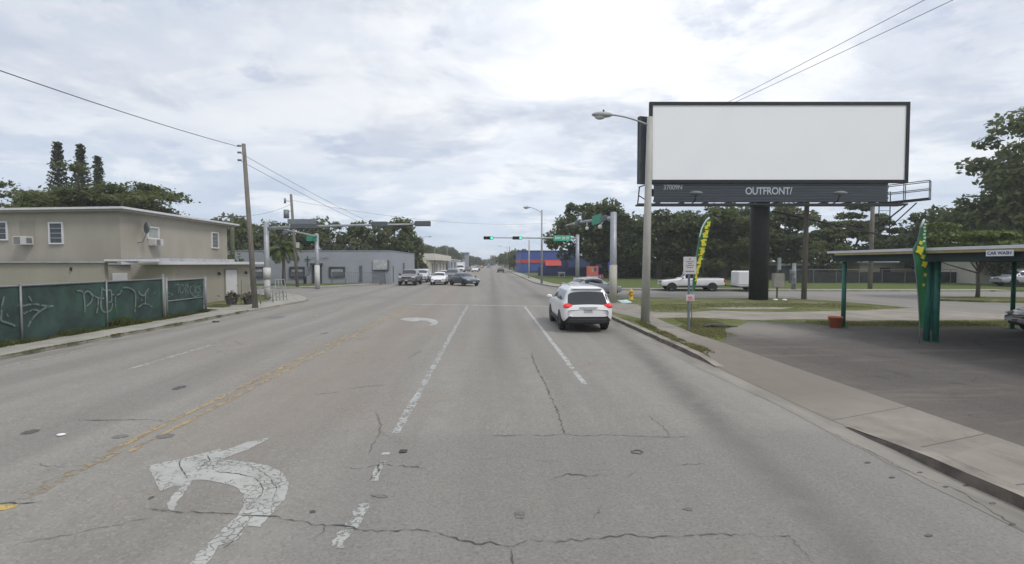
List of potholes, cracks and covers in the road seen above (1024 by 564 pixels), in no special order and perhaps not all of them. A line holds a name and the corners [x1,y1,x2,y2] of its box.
crack [21,465,743,564]
crack [350,413,419,478]
crack [502,355,681,437]
